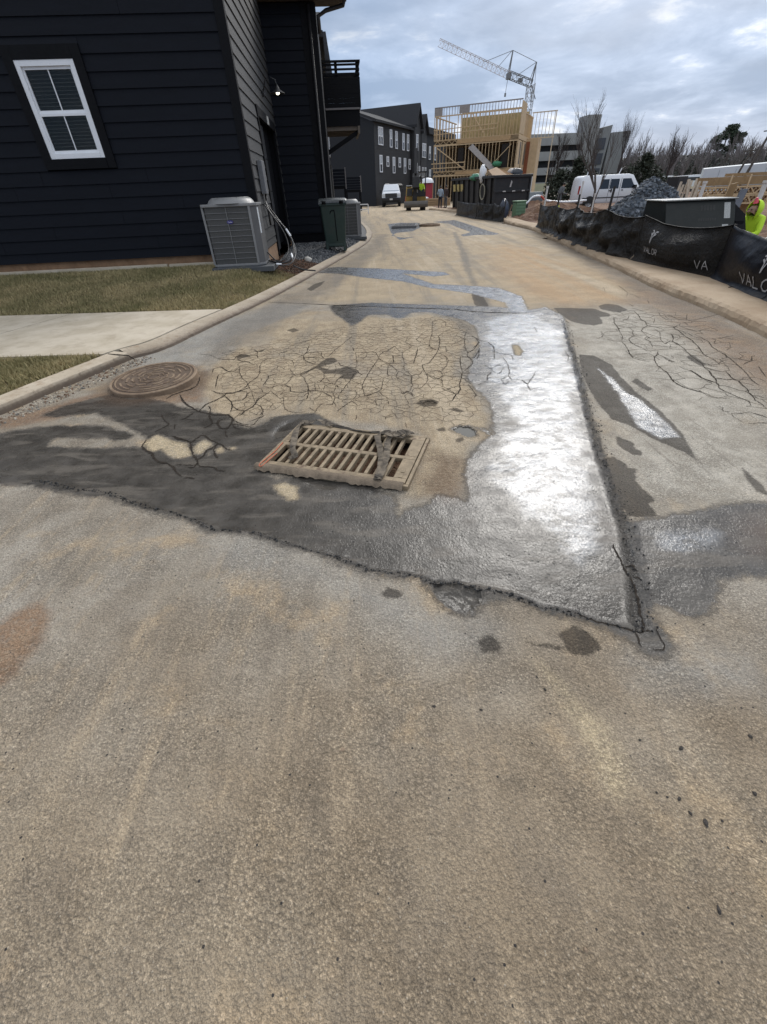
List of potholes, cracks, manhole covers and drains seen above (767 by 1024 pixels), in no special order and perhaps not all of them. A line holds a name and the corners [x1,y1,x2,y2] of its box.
crack [141,354,264,479]
crack [215,316,569,428]
crack [597,286,767,424]
manhole cover [109,362,199,398]
drain grate [254,424,430,491]
pothole [425,580,488,618]
